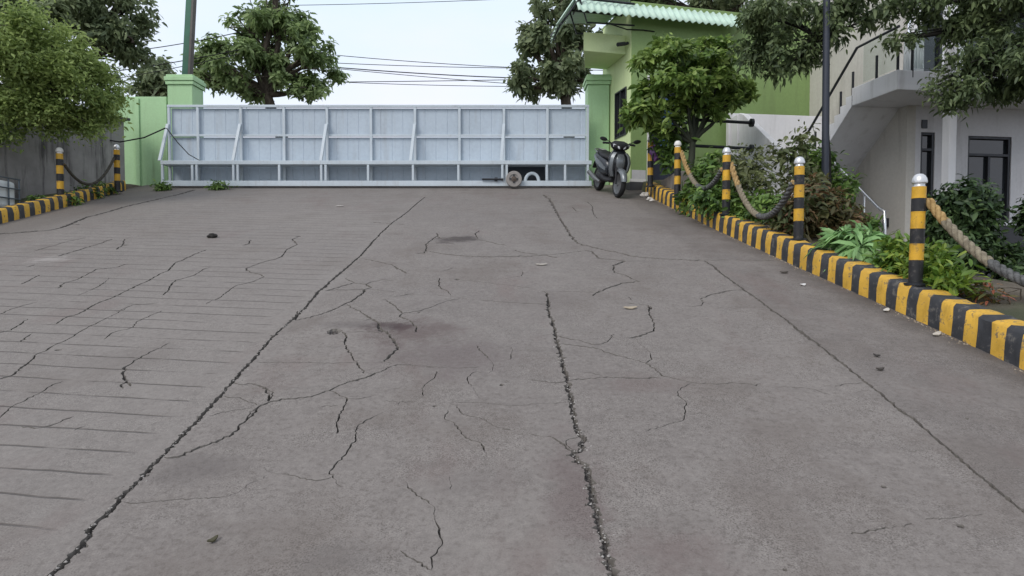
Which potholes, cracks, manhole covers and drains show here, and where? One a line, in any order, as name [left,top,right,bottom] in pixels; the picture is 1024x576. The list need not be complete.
crack [125,195,859,576]
crack [0,190,207,430]
crack [851,514,982,534]
